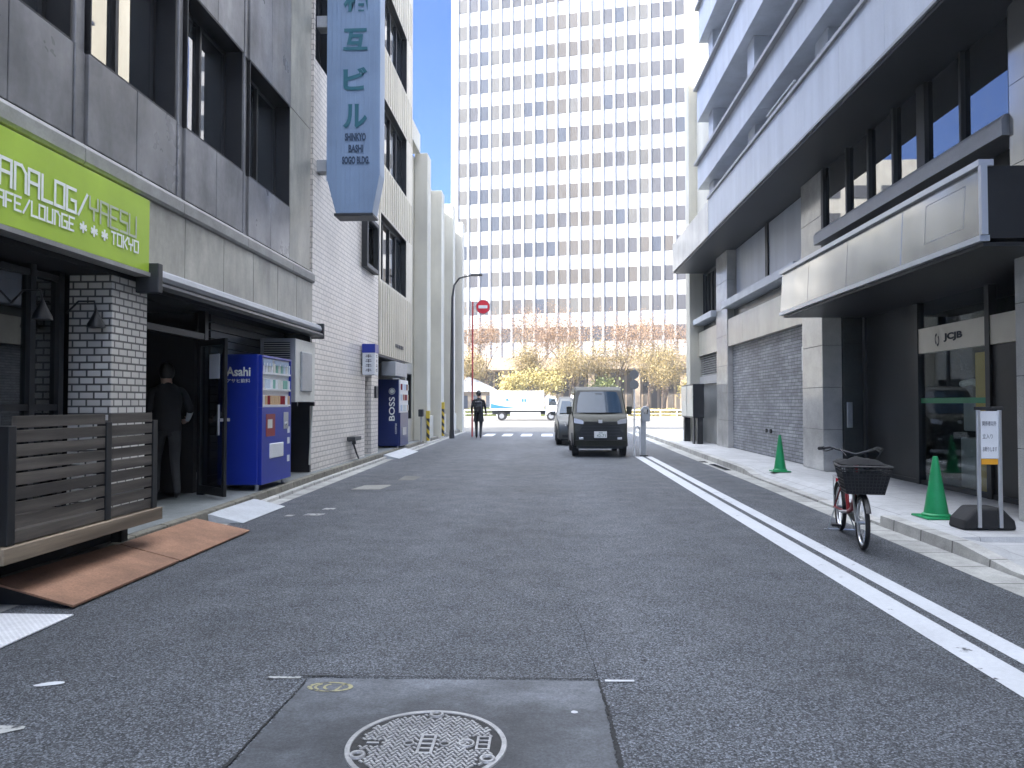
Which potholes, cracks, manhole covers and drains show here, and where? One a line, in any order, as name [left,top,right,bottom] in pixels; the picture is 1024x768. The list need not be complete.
manhole cover [344,710,507,768]
